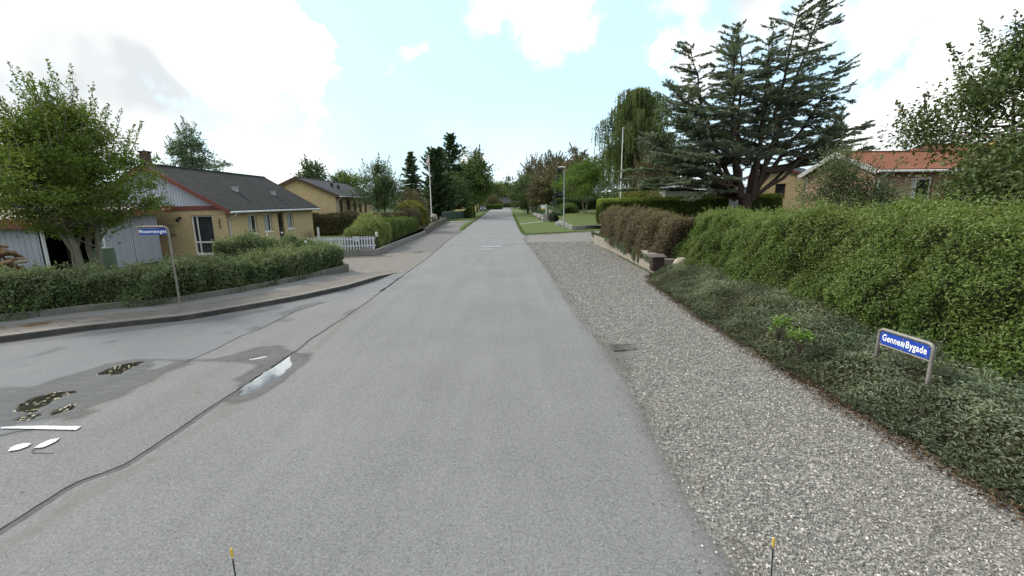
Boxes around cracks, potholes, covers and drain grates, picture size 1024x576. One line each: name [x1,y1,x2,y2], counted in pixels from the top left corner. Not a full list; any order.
drain grate [610,344,639,352]
